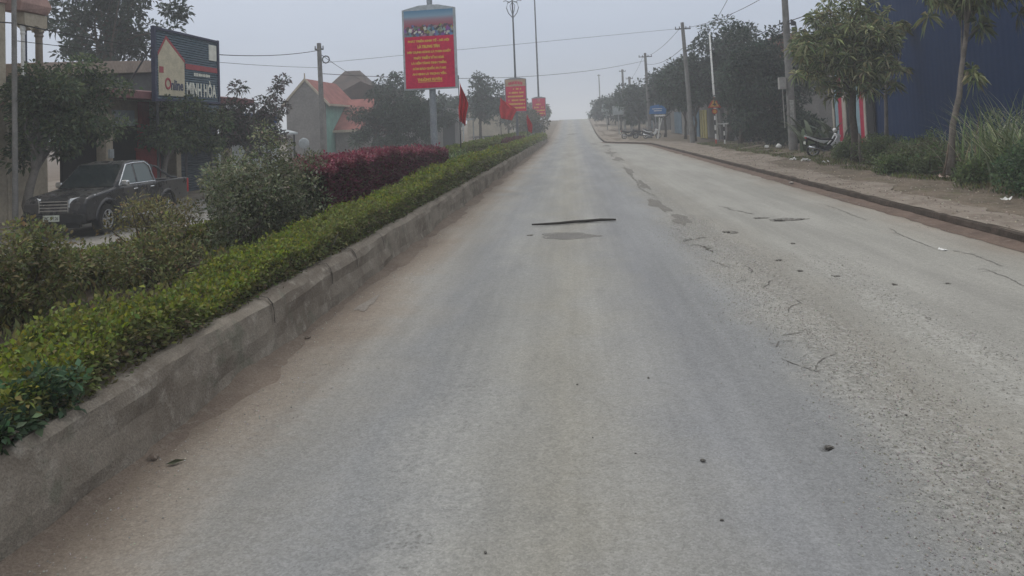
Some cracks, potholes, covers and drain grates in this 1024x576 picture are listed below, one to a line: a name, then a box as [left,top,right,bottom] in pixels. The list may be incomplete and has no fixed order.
crack [767,332,837,373]
crack [681,237,774,287]
crack [953,250,1024,286]
